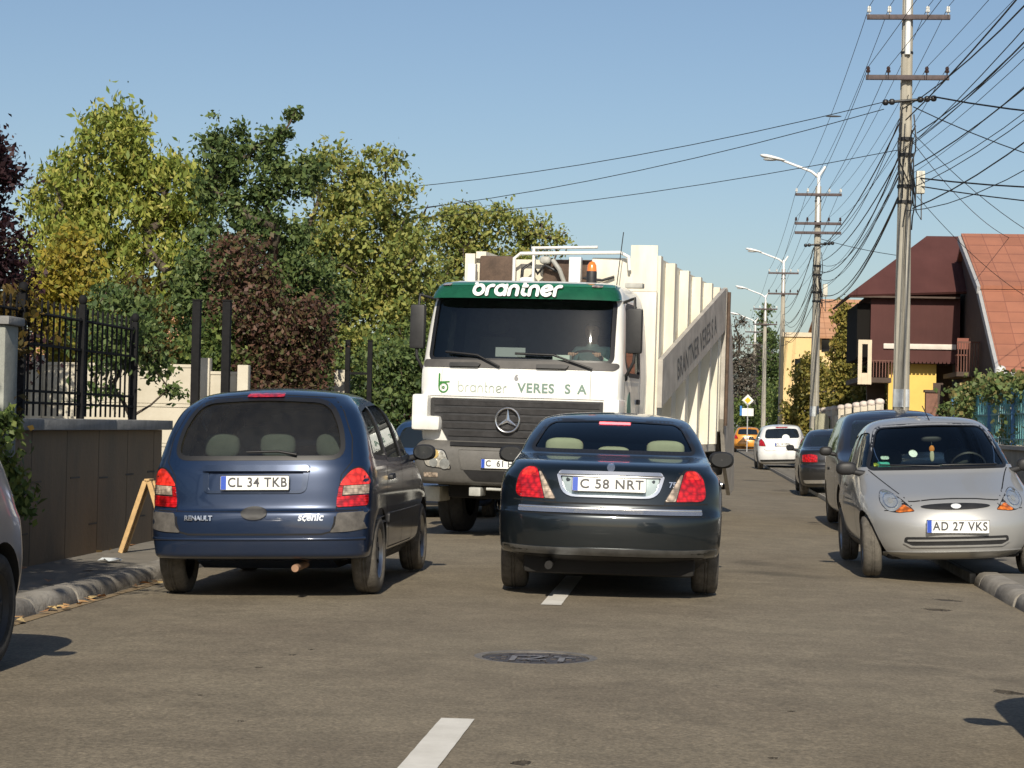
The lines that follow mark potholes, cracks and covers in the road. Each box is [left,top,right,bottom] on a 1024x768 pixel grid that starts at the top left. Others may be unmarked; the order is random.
manhole cover [474,650,598,664]
